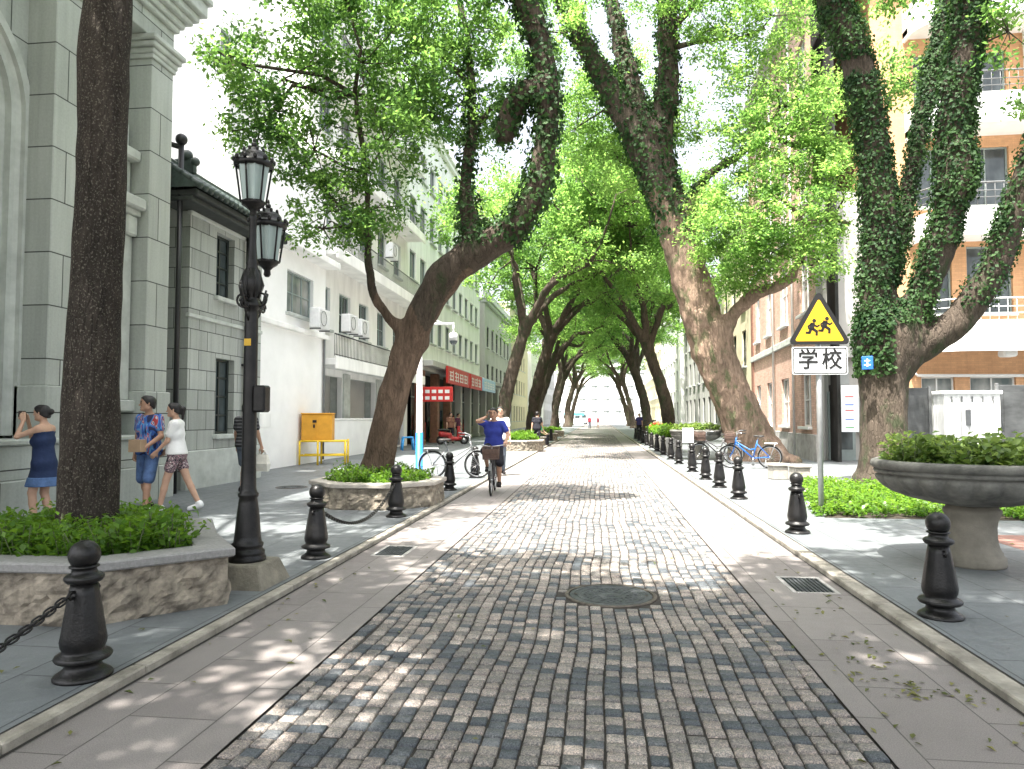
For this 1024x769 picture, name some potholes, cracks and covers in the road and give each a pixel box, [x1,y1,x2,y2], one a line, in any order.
manhole cover [565,584,658,608]
drain grate [775,576,841,594]
drain grate [370,545,418,557]
